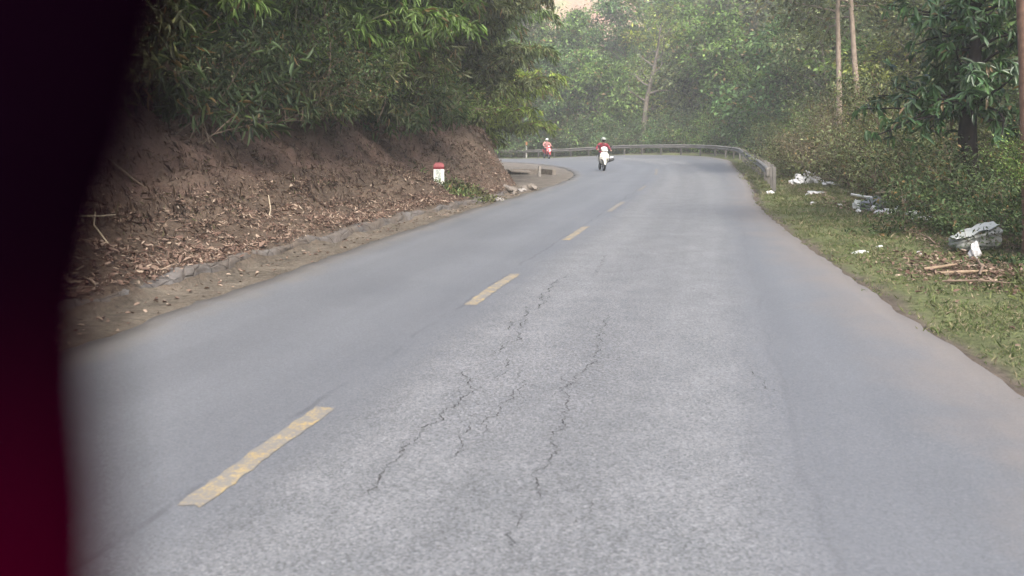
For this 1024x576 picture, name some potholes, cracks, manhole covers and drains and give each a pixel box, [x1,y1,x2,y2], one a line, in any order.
crack [505,315,611,548]
crack [367,277,565,494]
